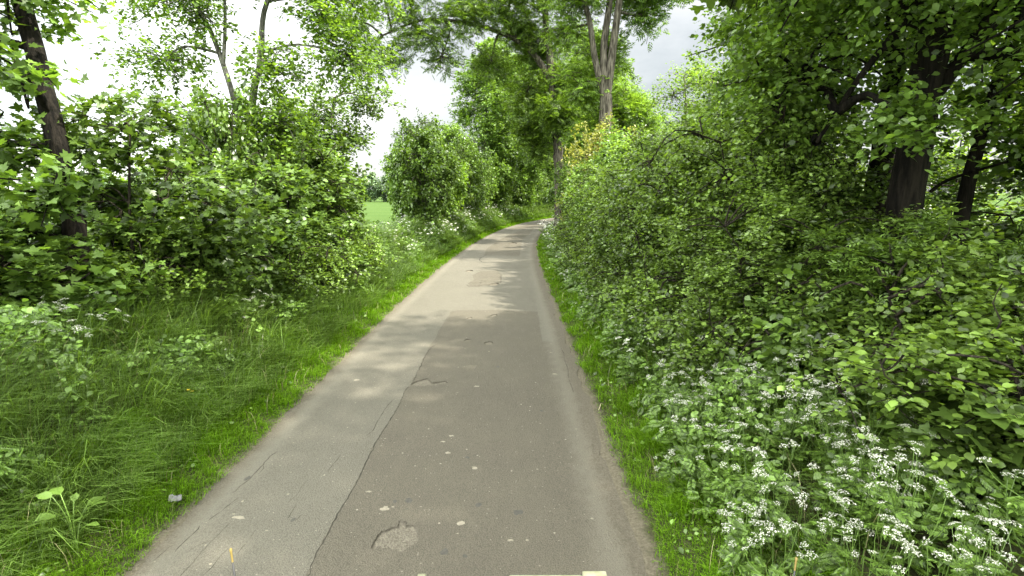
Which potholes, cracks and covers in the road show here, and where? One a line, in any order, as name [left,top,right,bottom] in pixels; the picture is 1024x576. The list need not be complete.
pothole [371,520,419,552]
crack [157,452,306,576]
